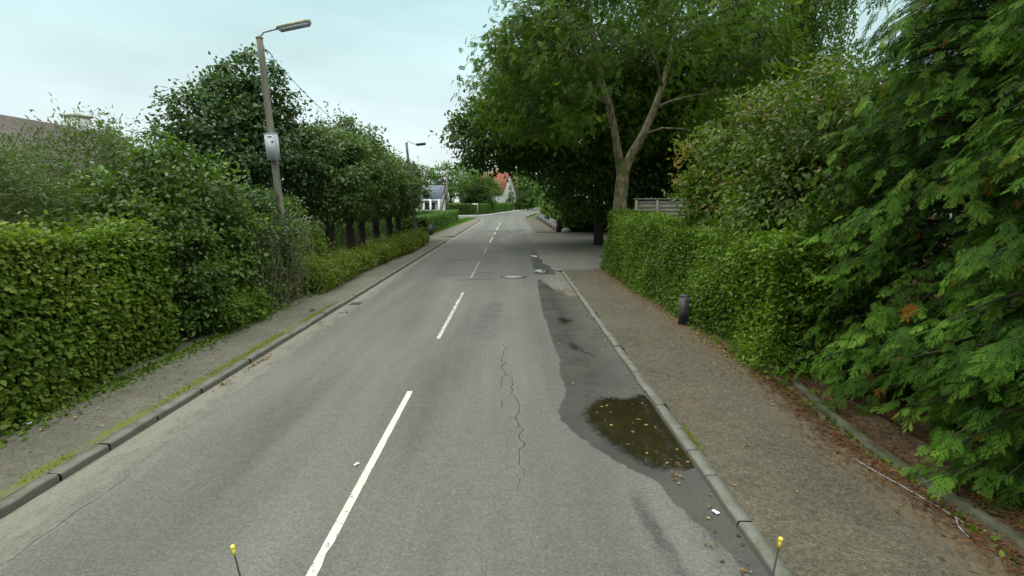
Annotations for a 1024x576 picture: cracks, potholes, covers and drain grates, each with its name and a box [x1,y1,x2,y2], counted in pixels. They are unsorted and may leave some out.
crack [2,474,130,565]
crack [469,306,525,488]
